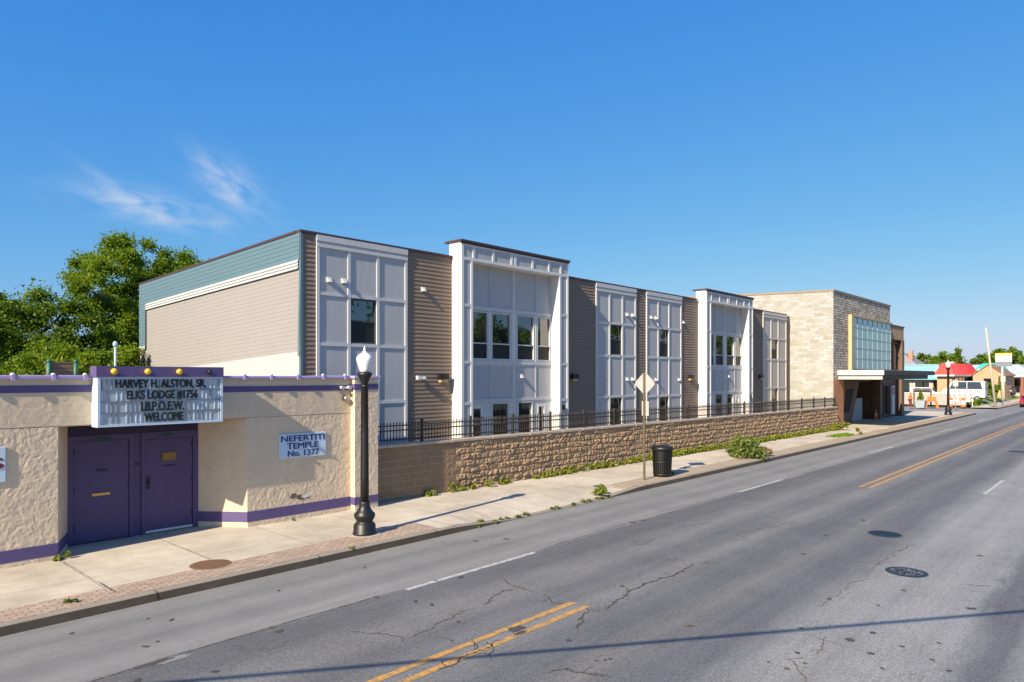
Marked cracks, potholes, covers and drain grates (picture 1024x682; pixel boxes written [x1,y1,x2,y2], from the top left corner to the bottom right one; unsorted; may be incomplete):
crack [548,666,610,677]
crack [788,637,826,681]
manhole cover [189,559,232,570]
crack [357,536,708,669]
manhole cover [867,530,903,538]
manhole cover [885,567,929,577]
